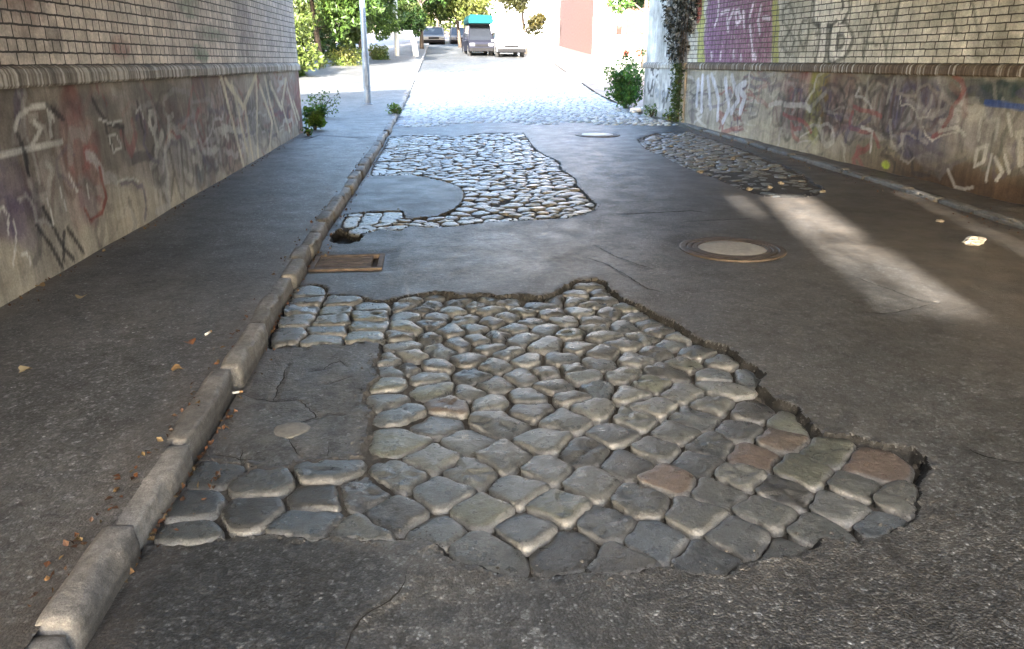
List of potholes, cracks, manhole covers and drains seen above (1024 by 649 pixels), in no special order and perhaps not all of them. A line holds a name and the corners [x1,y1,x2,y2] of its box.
manhole cover [679,237,787,262]
crack [219,361,346,467]
crack [595,246,661,292]
pothole [340,132,601,241]
pothole [147,278,933,585]
crack [345,571,407,649]
pothole [329,228,363,244]
pothole [637,131,825,198]
drain grate [308,253,385,272]
